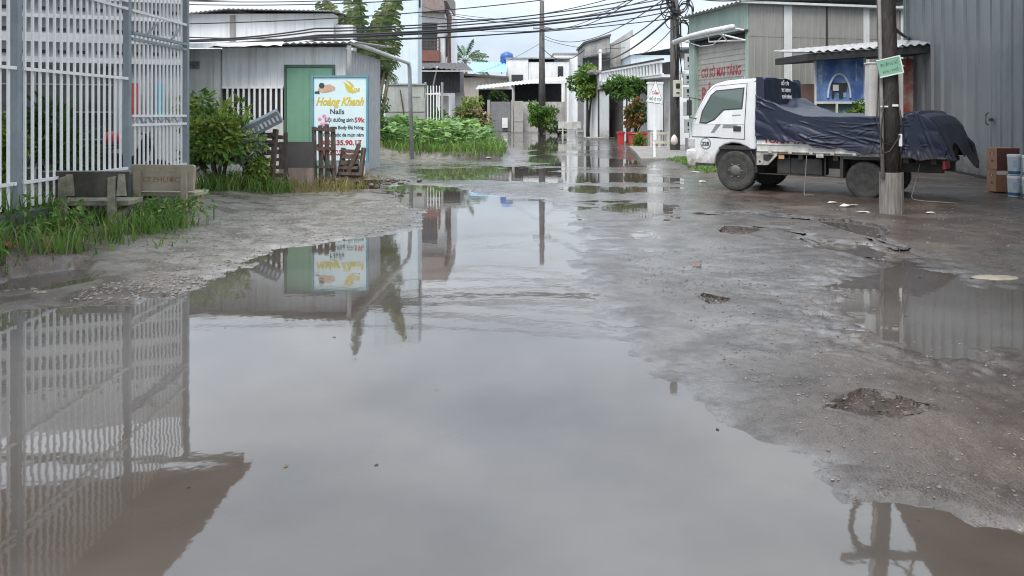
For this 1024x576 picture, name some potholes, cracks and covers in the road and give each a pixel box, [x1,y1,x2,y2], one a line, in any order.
pothole [716,225,764,235]
pothole [698,293,730,304]
crack [704,210,913,260]
pothole [809,218,892,242]
pothole [824,387,947,420]
